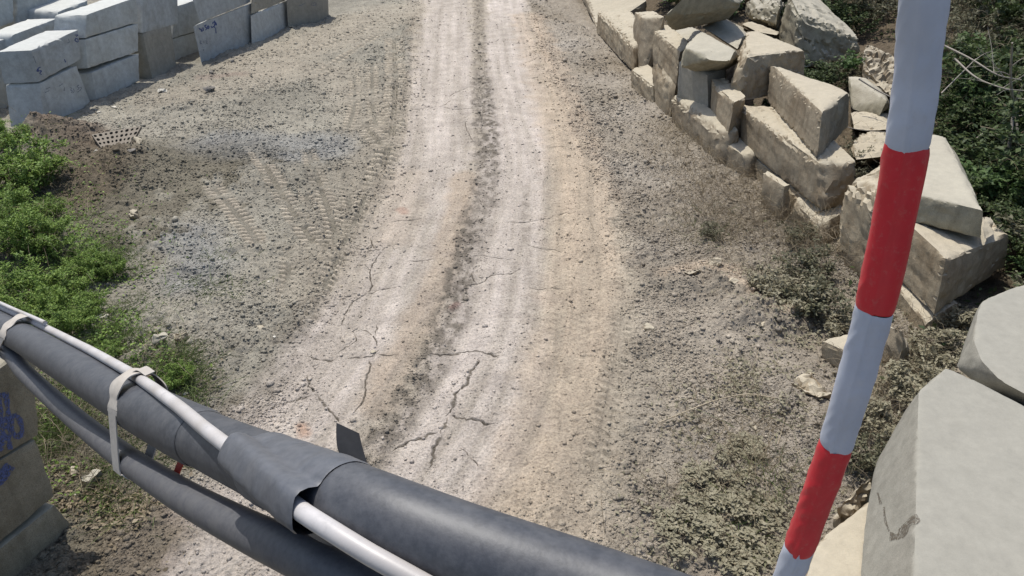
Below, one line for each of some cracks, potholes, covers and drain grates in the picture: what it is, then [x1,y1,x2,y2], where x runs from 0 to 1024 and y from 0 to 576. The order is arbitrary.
crack [263,238,505,470]
crack [462,244,573,291]
